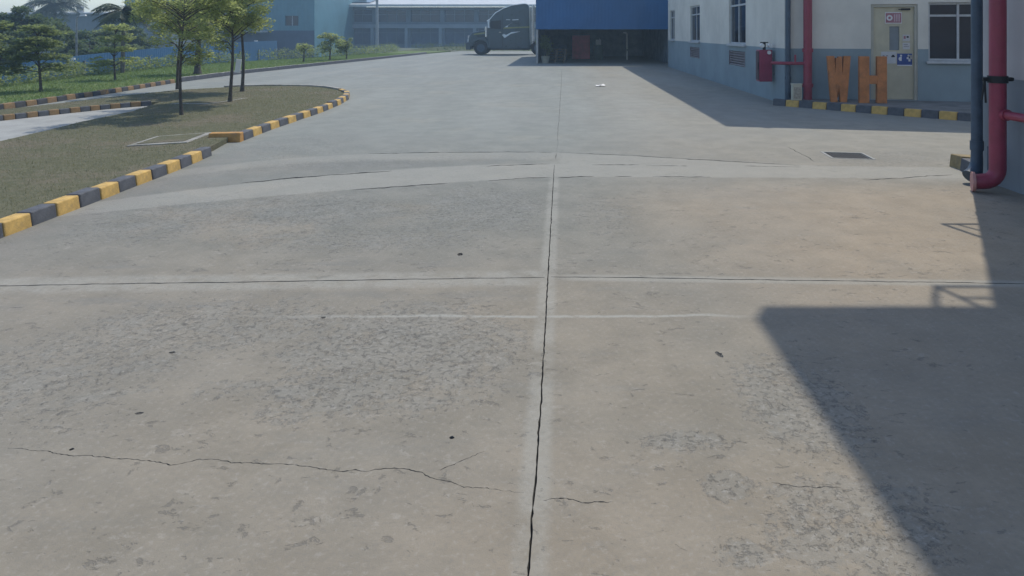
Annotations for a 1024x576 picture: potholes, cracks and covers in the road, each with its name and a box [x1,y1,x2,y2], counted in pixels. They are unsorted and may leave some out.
crack [16,448,522,493]
drain grate [820,151,877,160]
